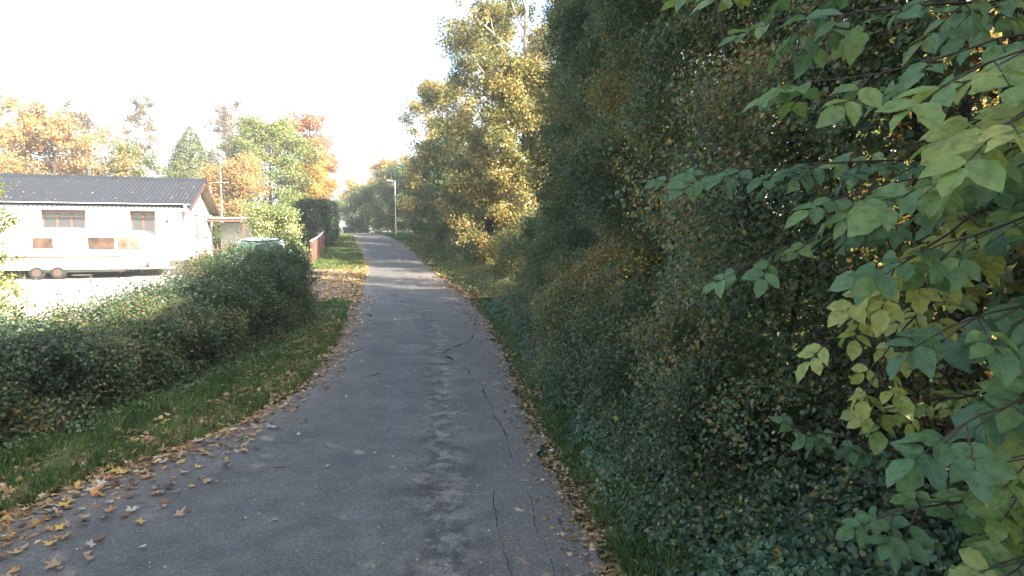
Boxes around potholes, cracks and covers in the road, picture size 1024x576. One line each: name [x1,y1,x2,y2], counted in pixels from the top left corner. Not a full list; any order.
crack [493,473,555,576]
crack [437,335,514,461]
